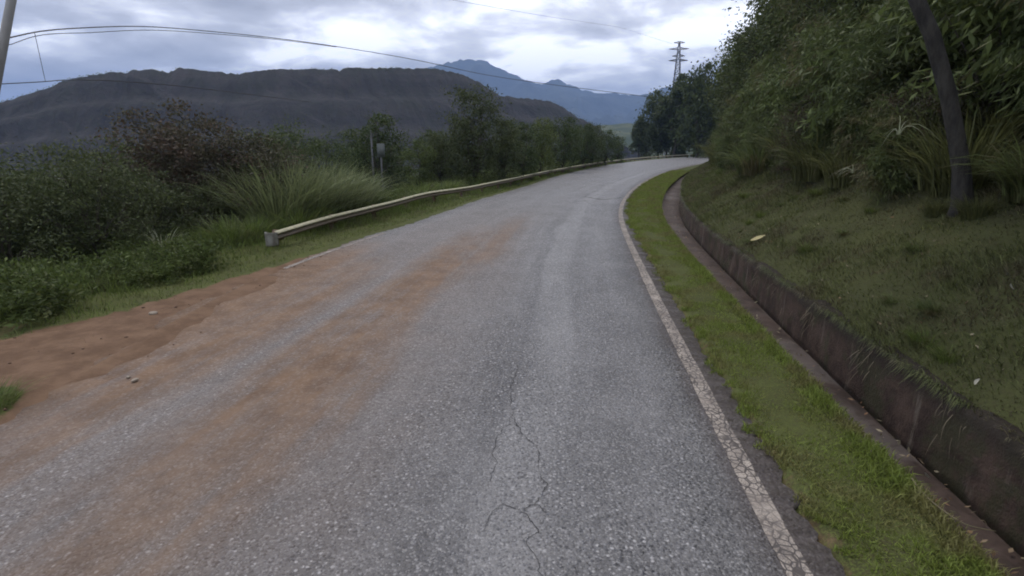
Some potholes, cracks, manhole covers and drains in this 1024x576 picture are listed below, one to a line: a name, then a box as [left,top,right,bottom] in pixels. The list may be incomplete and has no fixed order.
crack [479,370,548,576]
